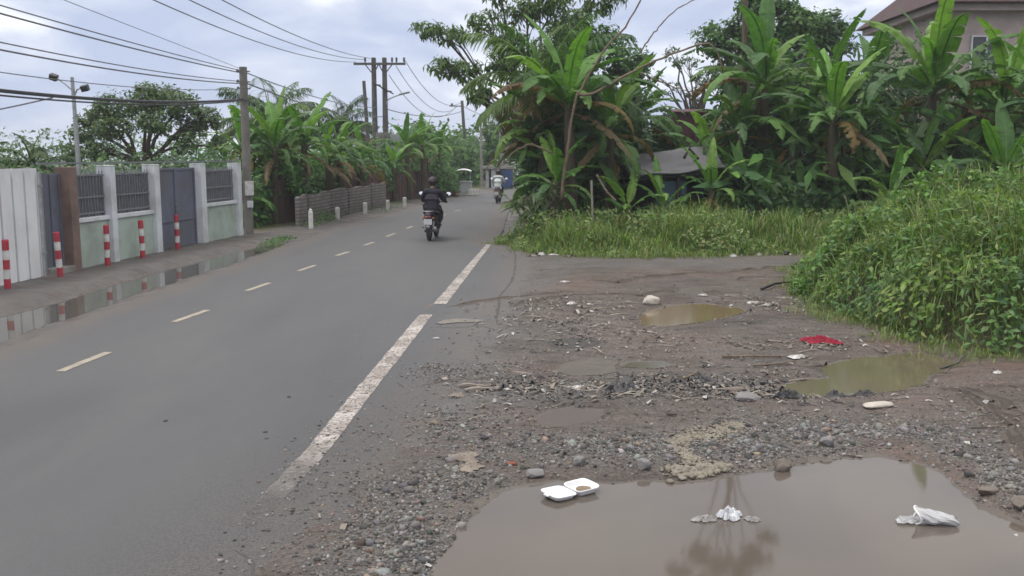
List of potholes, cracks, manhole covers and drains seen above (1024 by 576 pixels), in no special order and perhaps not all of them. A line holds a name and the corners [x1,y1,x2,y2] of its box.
pothole [431,452,1024,576]
pothole [532,406,605,427]
pothole [780,352,964,397]
pothole [552,354,619,376]
pothole [635,303,747,327]
pothole [618,361,675,369]
